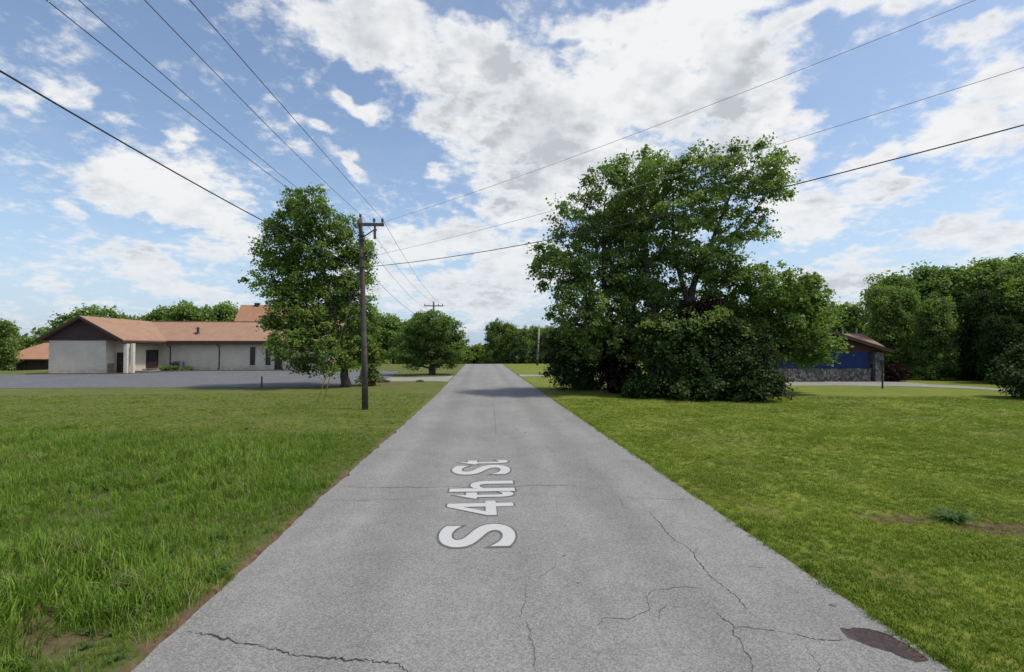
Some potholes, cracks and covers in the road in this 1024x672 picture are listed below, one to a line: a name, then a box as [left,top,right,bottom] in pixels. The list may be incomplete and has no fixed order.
crack [343,485,843,672]
crack [187,631,407,670]
